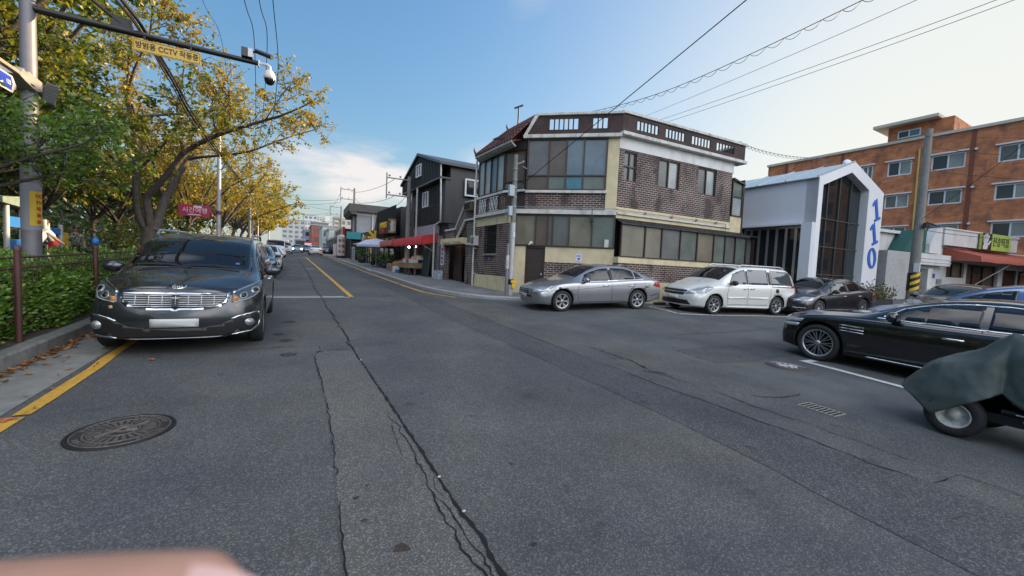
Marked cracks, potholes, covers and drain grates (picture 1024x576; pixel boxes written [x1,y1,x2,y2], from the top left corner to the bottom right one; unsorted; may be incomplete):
manhole cover [60,414,176,451]
drain grate [797,402,846,417]
manhole cover [765,361,811,372]
crack [314,305,507,576]
